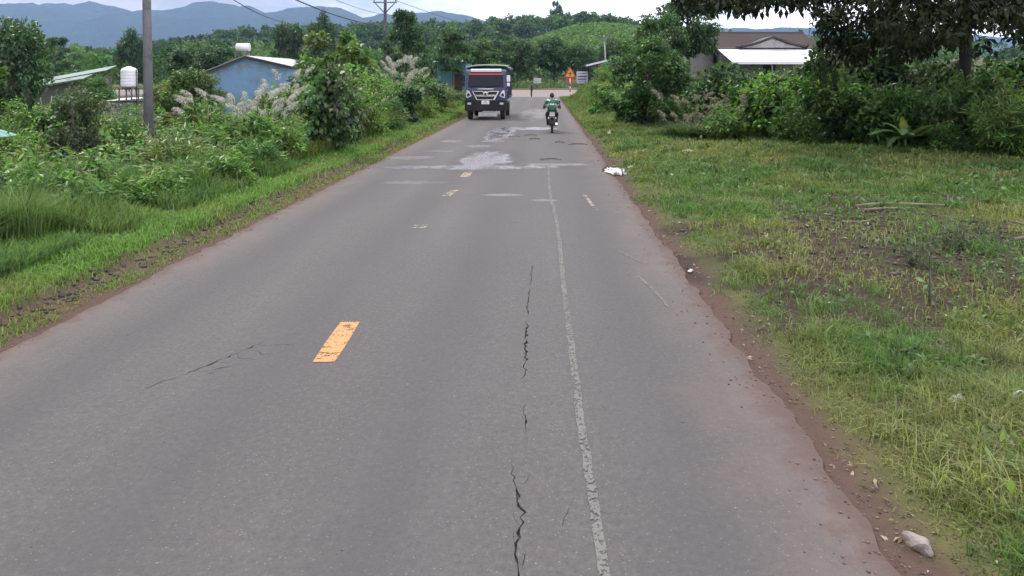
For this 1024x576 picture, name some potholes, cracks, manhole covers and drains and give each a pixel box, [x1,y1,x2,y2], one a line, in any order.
crack [500,466,529,576]
crack [520,265,533,380]
